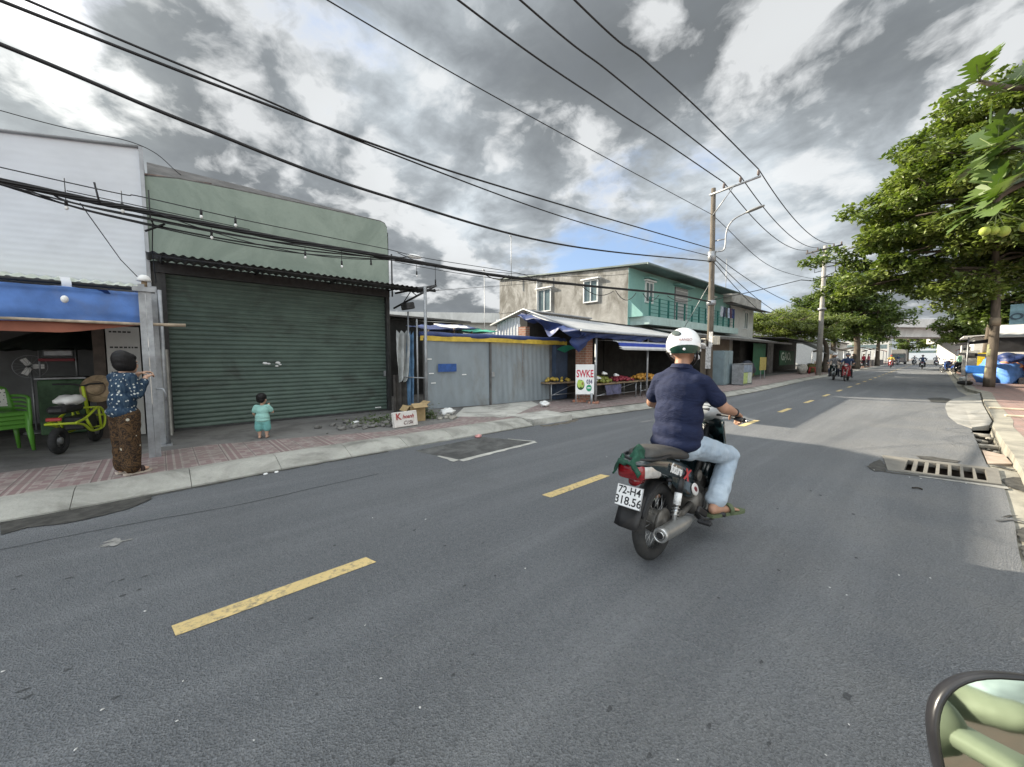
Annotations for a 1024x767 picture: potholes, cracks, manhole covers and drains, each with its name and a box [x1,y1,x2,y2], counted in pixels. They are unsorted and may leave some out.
drain grate [883,455,1002,485]
